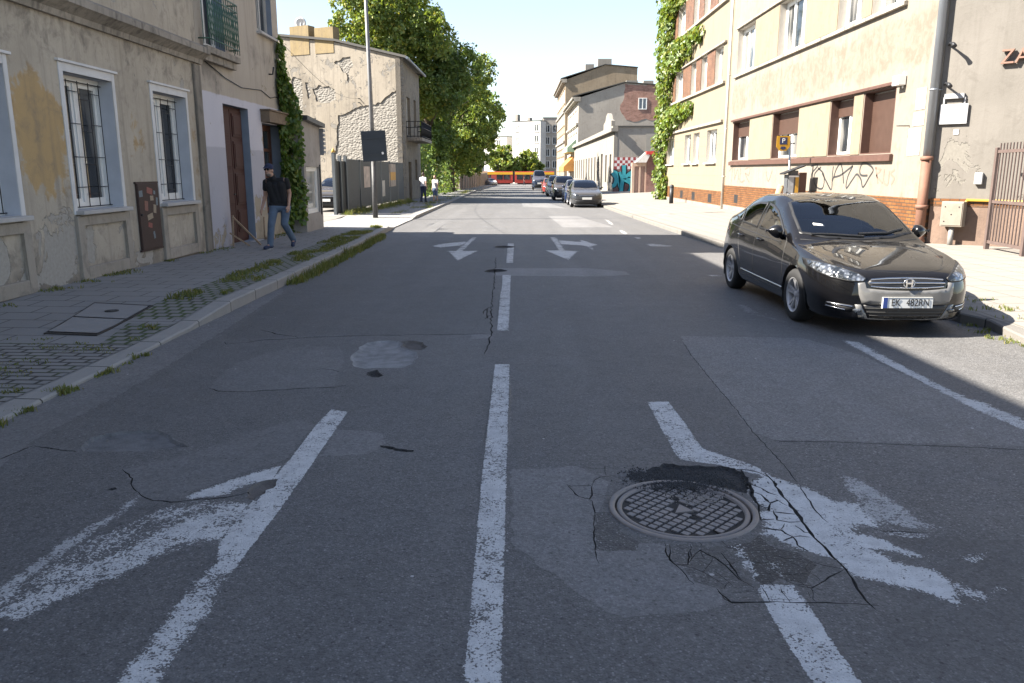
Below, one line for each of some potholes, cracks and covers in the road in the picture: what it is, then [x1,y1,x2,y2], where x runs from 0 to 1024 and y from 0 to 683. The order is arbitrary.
manhole cover [43,302,154,336]
manhole cover [609,480,759,545]
crack [122,469,249,503]
pothole [648,463,751,493]
crack [568,467,921,609]
crack [213,369,346,392]
crack [230,260,496,354]
